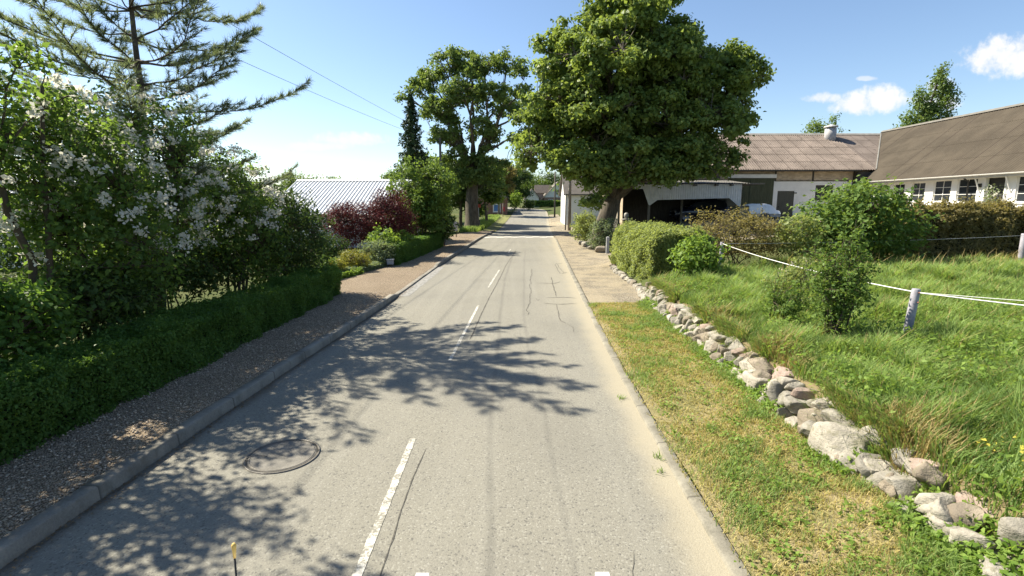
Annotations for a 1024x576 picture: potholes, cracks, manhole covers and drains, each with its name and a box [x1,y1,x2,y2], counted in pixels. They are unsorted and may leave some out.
crack [526,263,575,332]
manhole cover [243,439,320,474]
